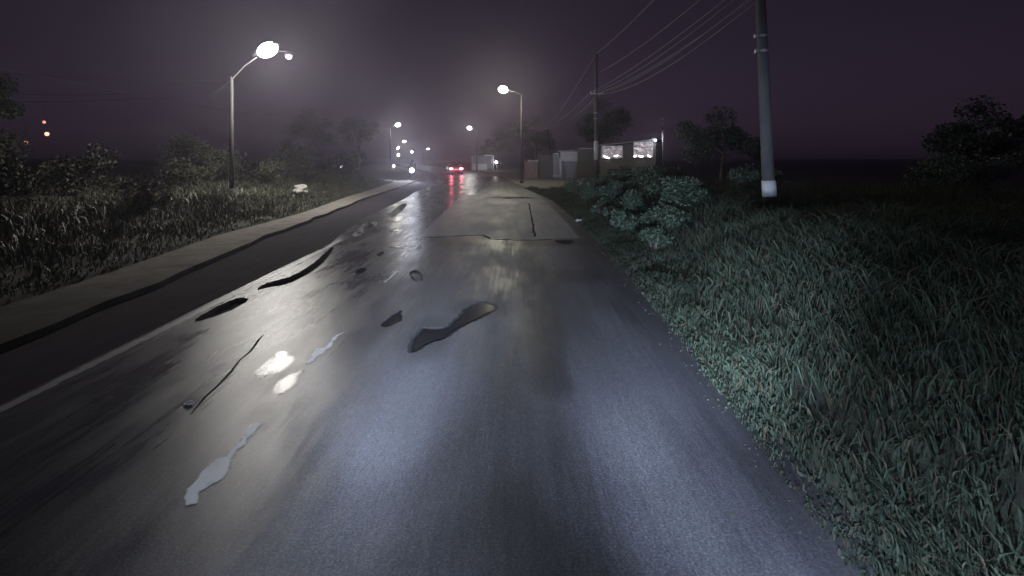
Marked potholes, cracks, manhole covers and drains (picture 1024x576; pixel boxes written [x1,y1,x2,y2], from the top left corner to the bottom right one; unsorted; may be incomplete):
pothole [409,270,423,281]
pothole [257,247,334,290]
crack [191,334,264,414]
pothole [407,301,498,353]
pothole [195,297,248,322]
pothole [380,310,403,327]
crack [428,203,551,241]
